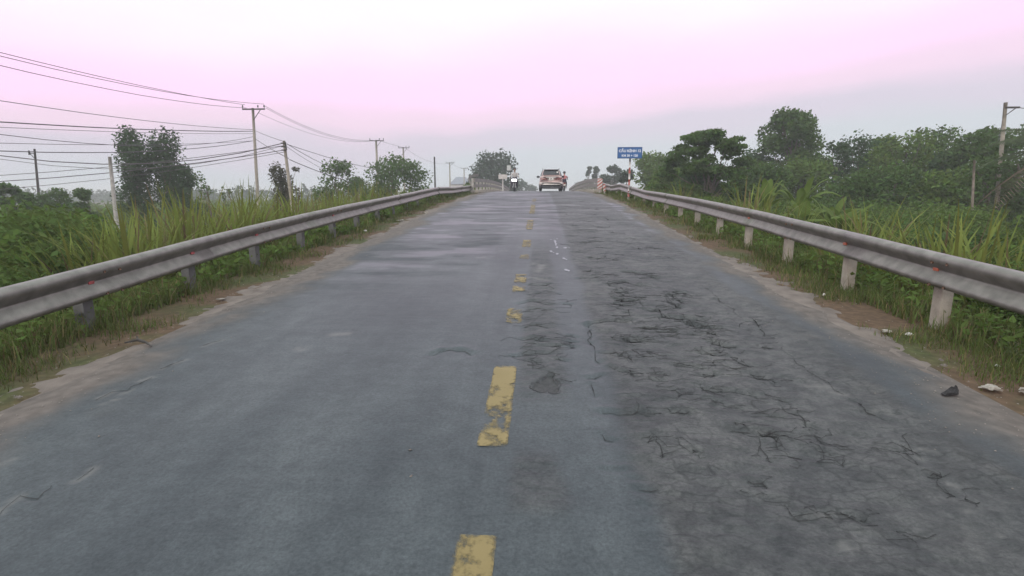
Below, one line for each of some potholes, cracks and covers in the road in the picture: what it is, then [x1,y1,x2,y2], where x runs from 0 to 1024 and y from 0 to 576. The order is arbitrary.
crack [585,230,980,542]
crack [550,201,642,259]
pothole [530,372,560,393]
crack [498,282,600,395]
